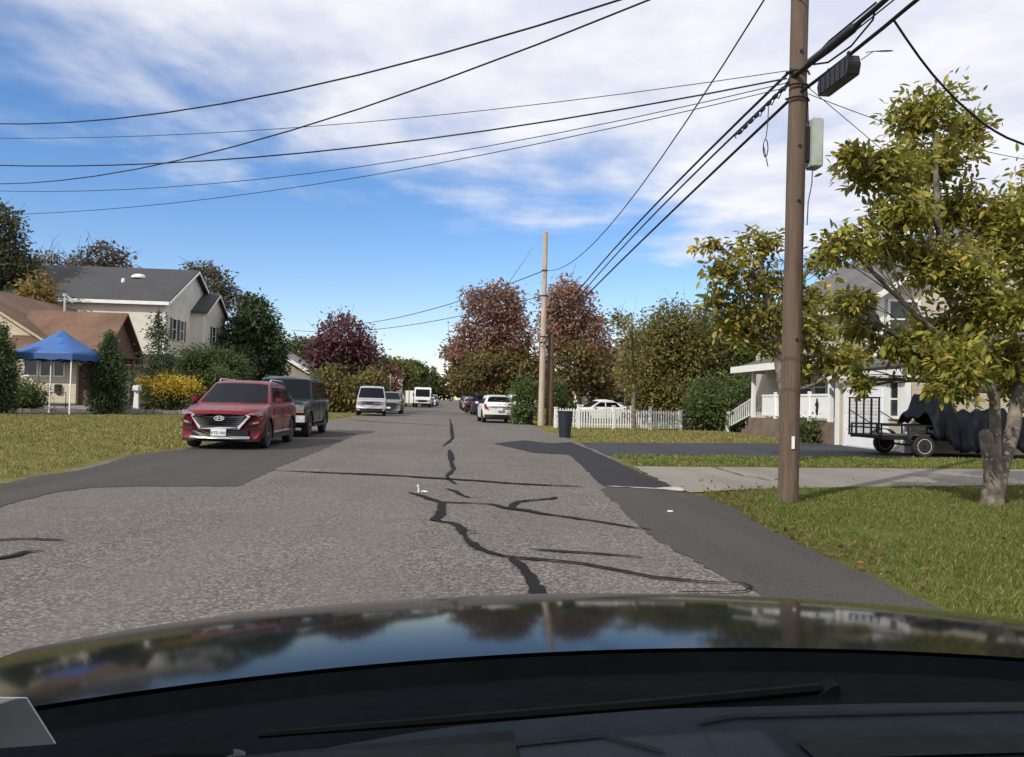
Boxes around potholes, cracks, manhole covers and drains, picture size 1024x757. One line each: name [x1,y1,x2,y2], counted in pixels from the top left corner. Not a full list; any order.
crack [0,538,64,558]
